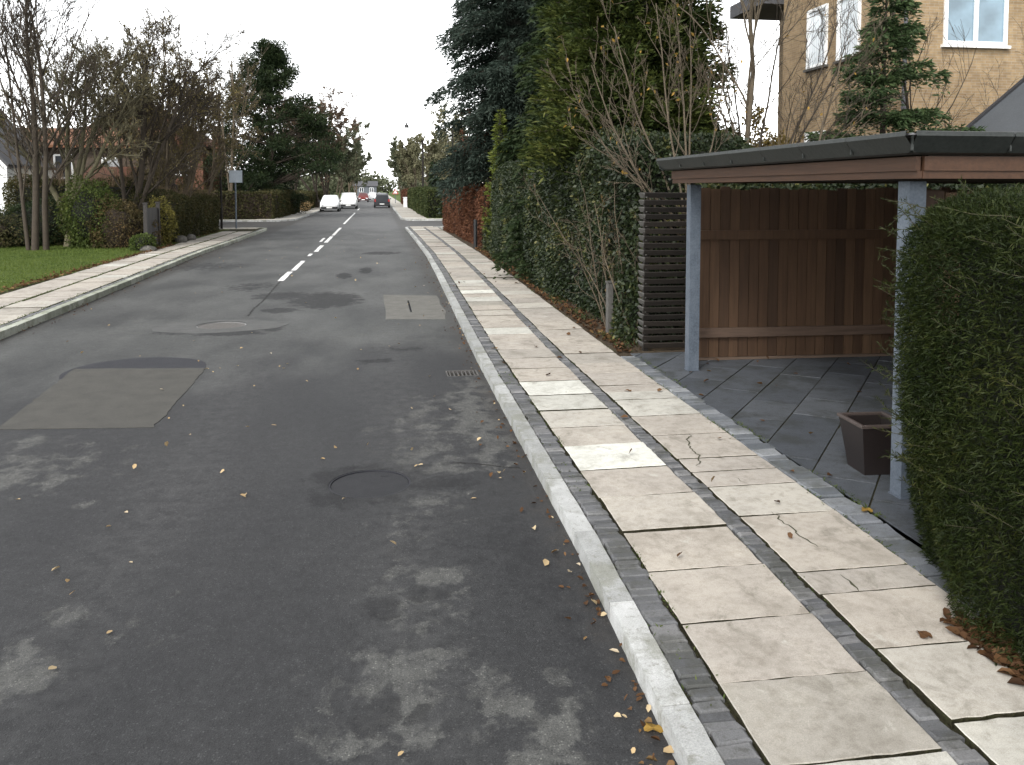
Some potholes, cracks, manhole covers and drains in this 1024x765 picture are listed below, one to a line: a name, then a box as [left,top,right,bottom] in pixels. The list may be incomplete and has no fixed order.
manhole cover [328,470,411,498]
